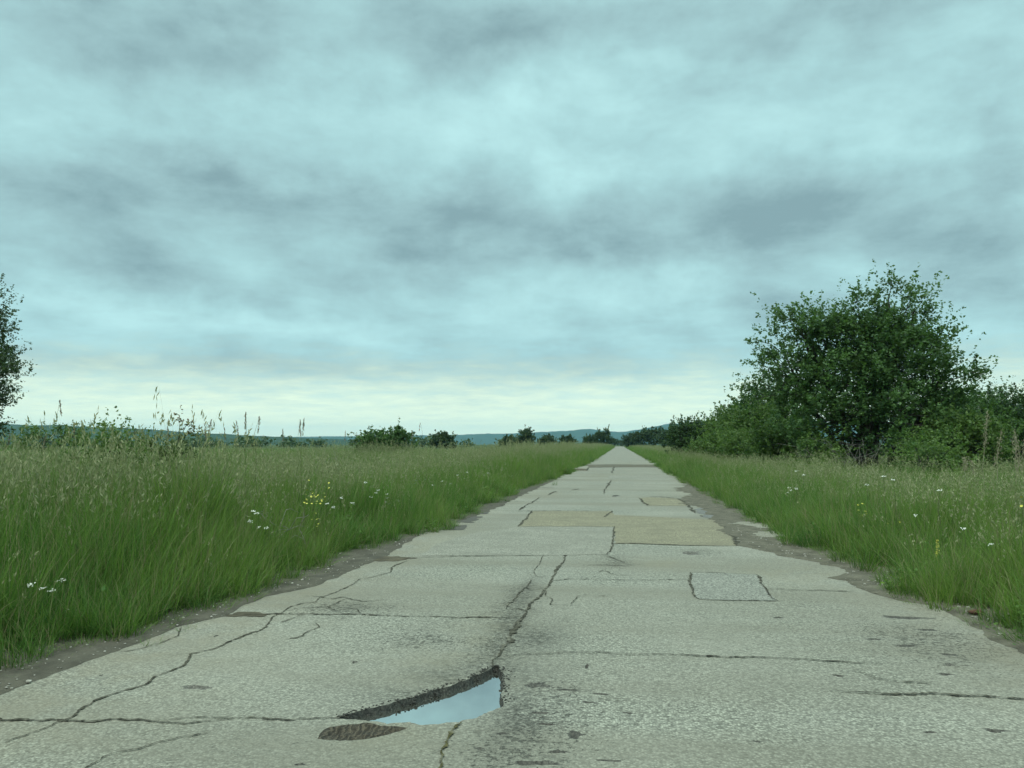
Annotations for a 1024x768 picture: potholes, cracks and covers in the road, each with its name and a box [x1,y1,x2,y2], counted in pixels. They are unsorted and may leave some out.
crack [0,487,1024,768]
pothole [337,666,505,719]
